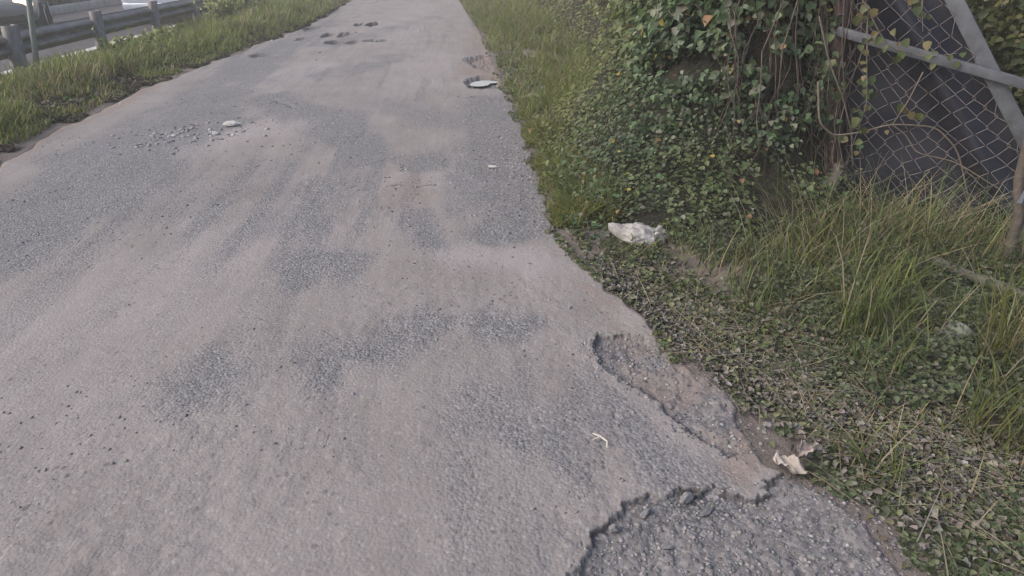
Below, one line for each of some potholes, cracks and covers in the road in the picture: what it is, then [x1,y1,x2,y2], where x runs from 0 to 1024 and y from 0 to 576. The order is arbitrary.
pothole [565,472,900,576]
pothole [461,54,491,72]
pothole [462,74,501,90]
pothole [583,331,757,462]
